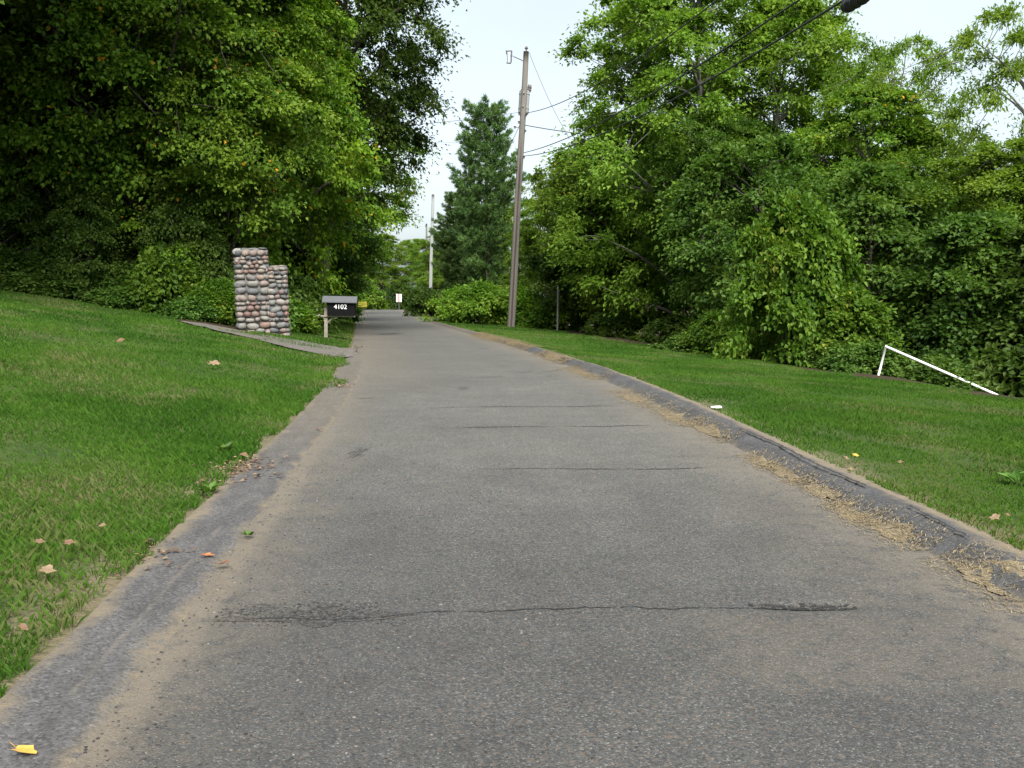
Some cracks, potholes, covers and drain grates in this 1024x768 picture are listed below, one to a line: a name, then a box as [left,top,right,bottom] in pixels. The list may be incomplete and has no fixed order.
crack [244,605,853,620]
